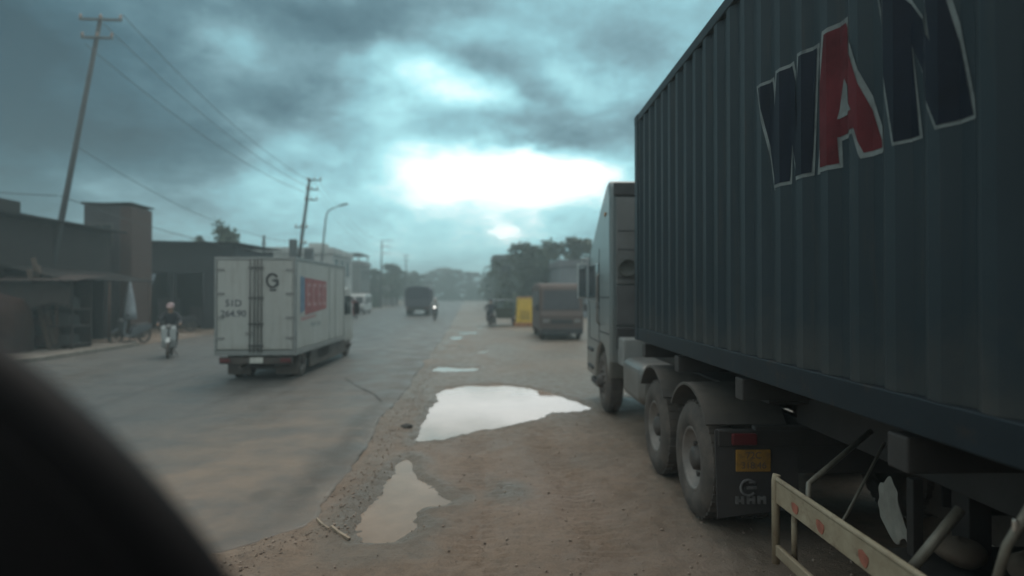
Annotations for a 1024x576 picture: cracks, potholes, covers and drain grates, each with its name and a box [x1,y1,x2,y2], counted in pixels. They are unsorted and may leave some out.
pothole [324,450,476,554]
pothole [395,382,603,448]
pothole [419,363,490,373]
